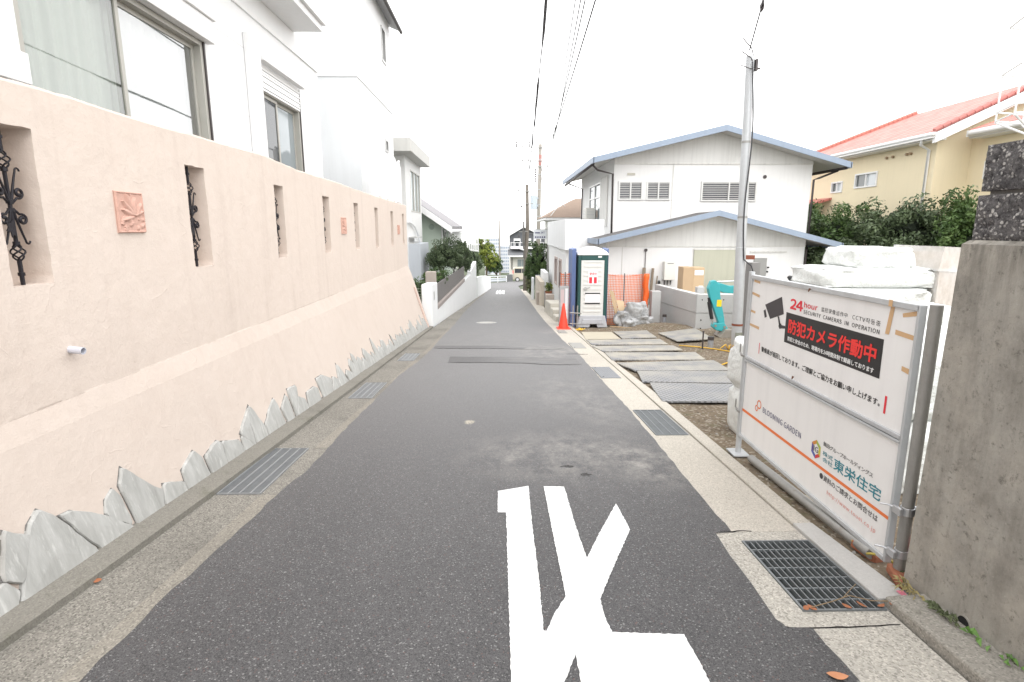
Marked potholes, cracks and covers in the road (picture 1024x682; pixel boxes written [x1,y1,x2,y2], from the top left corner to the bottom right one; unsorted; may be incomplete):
drain grate [348,382,387,399]
drain grate [216,448,309,495]
drain grate [633,410,689,435]
drain grate [742,540,887,612]
drain grate [397,353,420,361]
